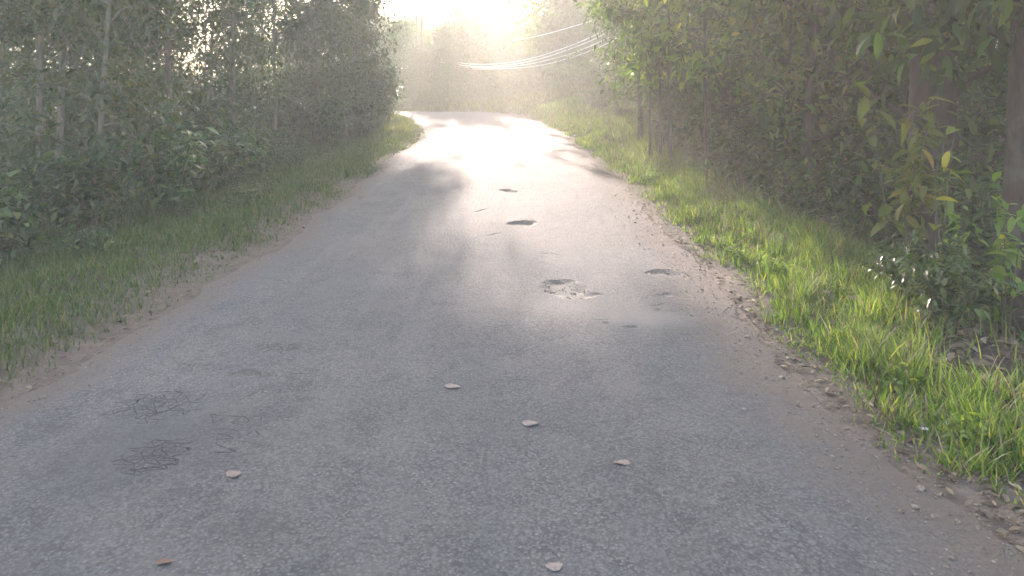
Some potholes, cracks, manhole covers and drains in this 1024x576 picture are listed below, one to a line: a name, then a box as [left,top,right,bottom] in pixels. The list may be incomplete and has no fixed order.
crack [100,391,267,475]
crack [258,342,300,353]
pothole [537,278,605,299]
pothole [643,269,685,278]
pothole [504,219,539,227]
